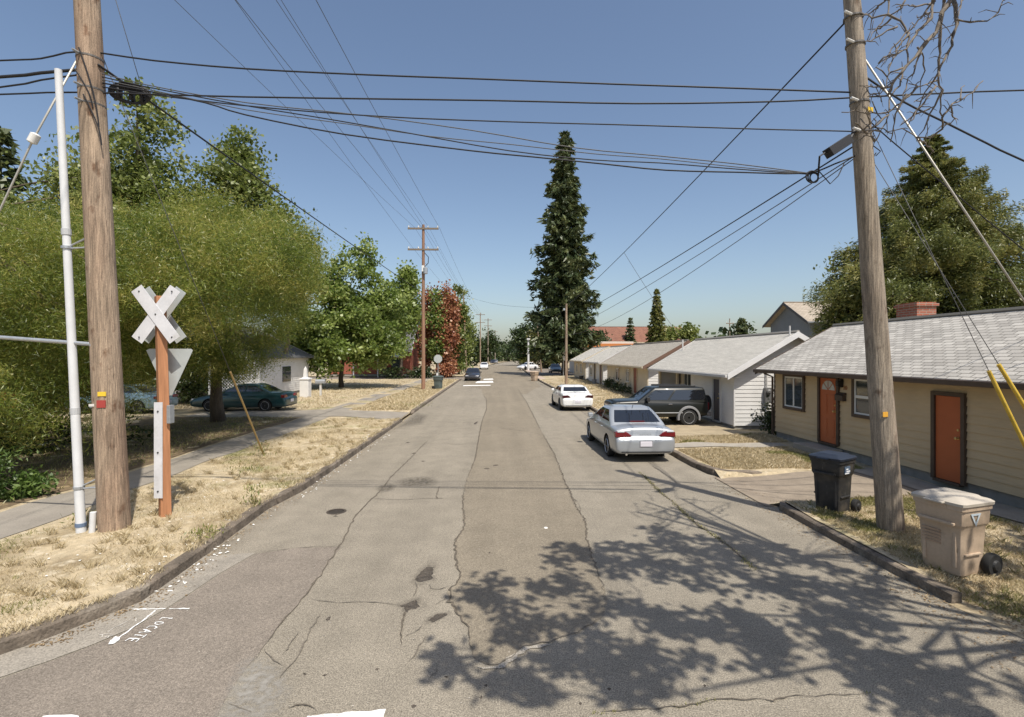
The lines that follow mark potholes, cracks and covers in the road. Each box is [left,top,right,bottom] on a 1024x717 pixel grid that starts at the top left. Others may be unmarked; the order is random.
crack [592,690,873,714]
crack [280,396,599,681]
crack [639,472,759,570]
